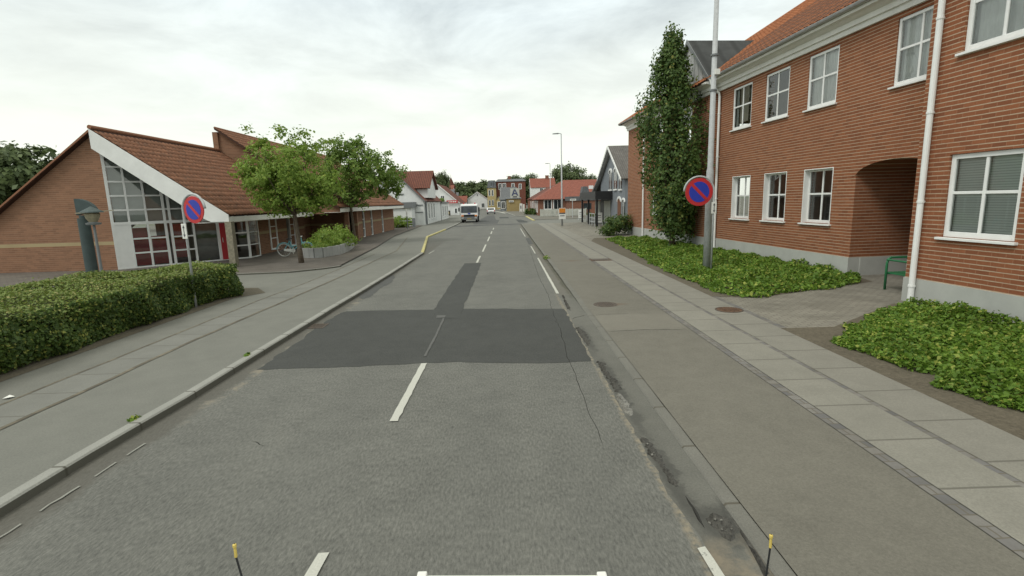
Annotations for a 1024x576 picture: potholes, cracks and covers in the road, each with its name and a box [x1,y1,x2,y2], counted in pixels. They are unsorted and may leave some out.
pothole [575,327,591,346]
crack [529,248,603,444]
pothole [616,393,633,416]
pothole [640,436,678,487]
pothole [596,361,623,392]
pothole [706,513,735,541]
